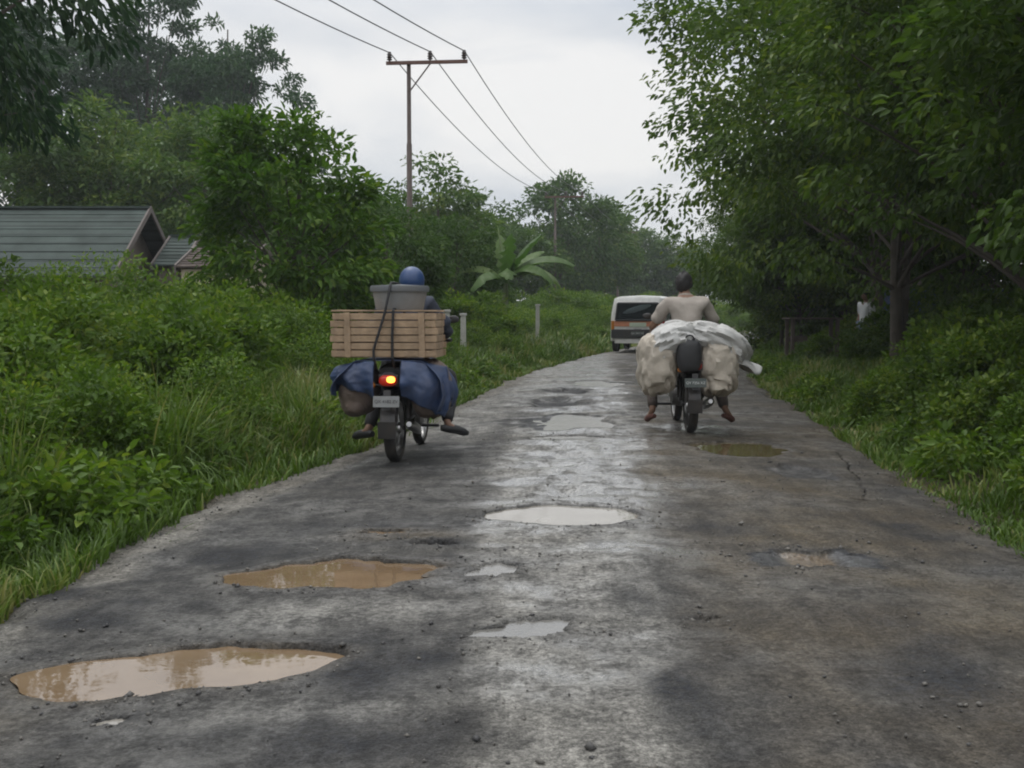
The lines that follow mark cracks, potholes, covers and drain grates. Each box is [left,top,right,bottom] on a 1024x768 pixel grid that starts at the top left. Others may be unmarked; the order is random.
pothole [195,552,477,595]
pothole [323,526,473,539]
pothole [509,410,639,434]
crack [827,451,882,501]
pothole [464,500,658,529]
pothole [665,439,806,460]
pothole [511,393,614,410]
pothole [425,610,602,645]
pothole [524,386,603,396]
pothole [0,635,393,712]
pothole [731,546,908,573]
pothole [421,556,541,582]
